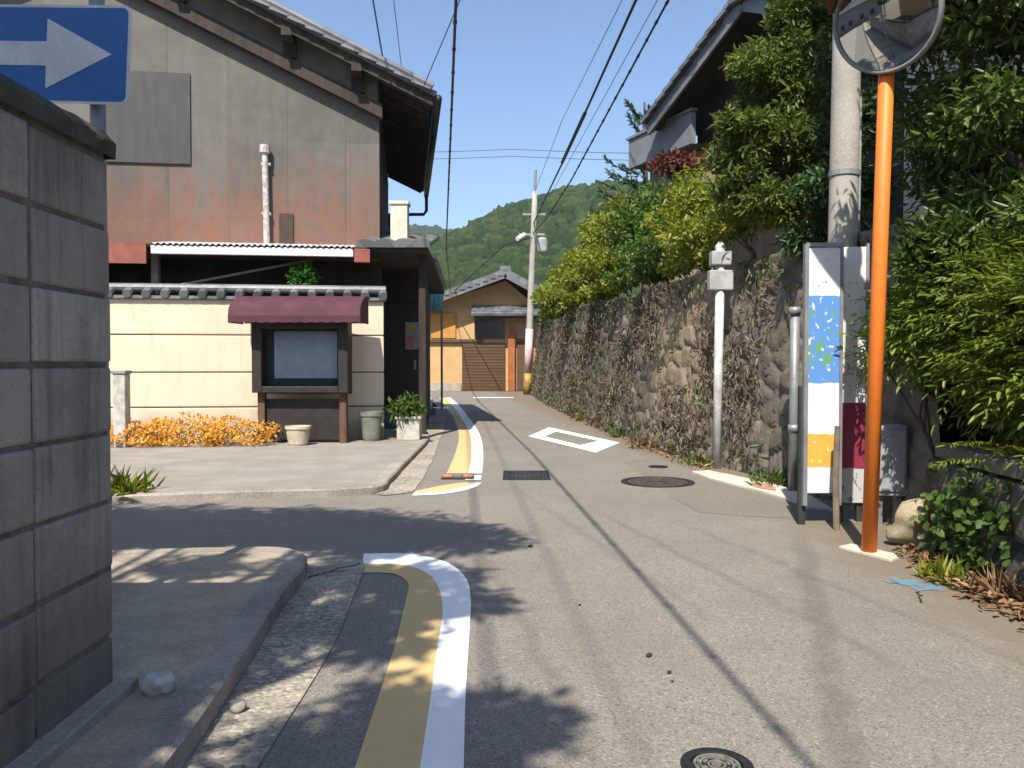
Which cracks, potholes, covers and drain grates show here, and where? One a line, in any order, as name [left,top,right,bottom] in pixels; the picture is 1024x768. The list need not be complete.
crack [307,562,361,579]
manhole cover [680,747,754,768]
manhole cover [621,476,695,488]
